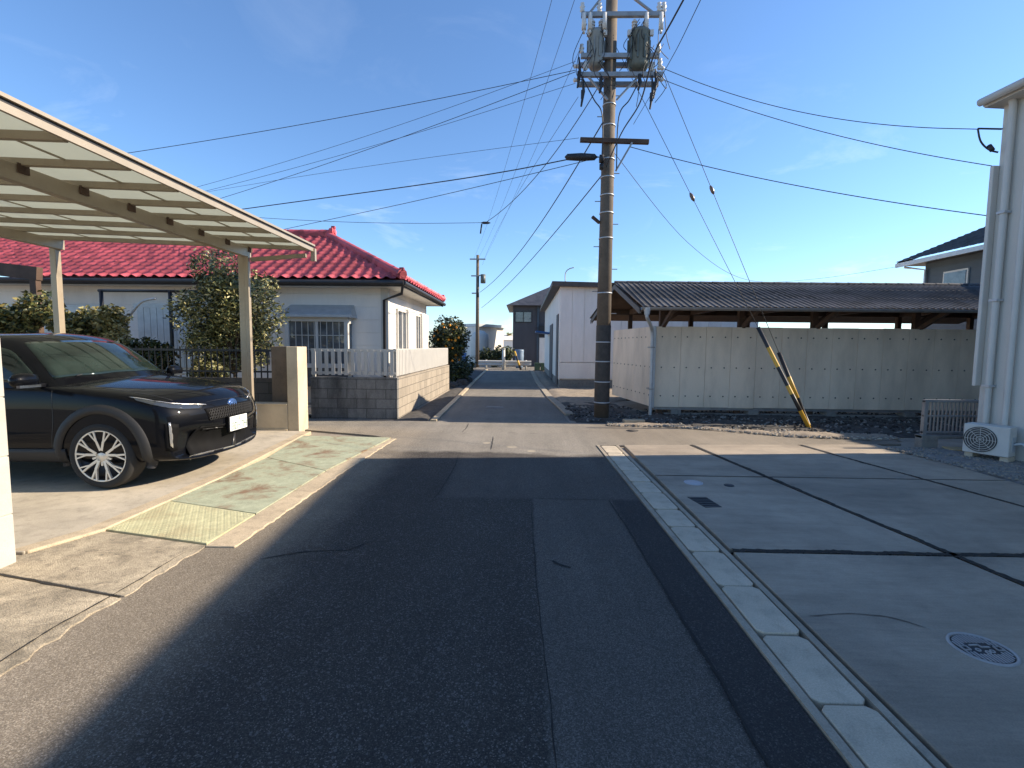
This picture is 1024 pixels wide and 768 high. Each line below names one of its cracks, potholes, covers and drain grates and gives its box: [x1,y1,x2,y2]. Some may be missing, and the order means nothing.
crack [257,541,371,560]
manhole cover [946,632,1022,667]
crack [810,613,923,627]
